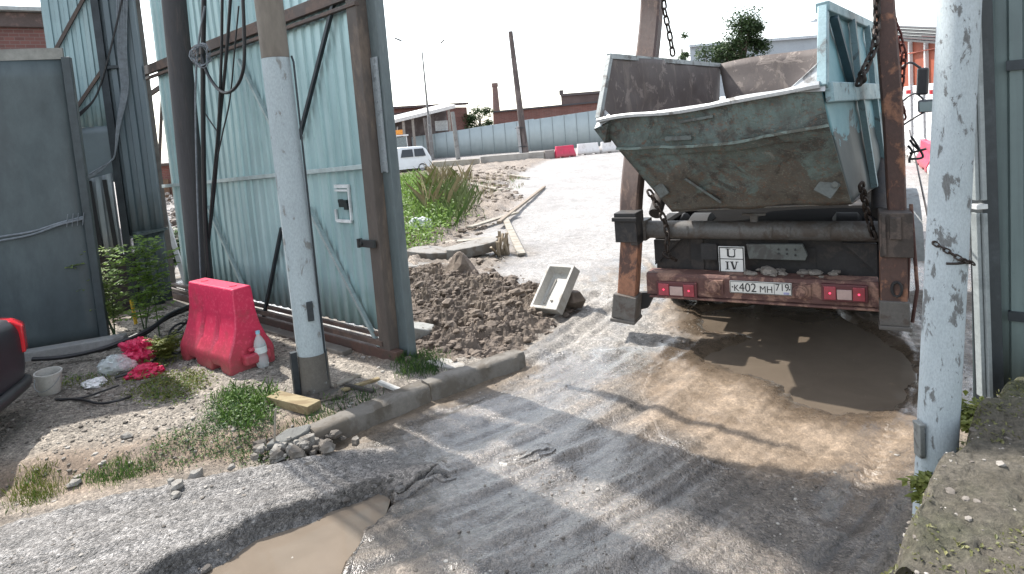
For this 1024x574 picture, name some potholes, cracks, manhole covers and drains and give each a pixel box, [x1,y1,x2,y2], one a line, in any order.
crack [390,461,457,503]
pothole [640,302,920,482]
pothole [134,474,405,574]
crack [498,443,556,465]
